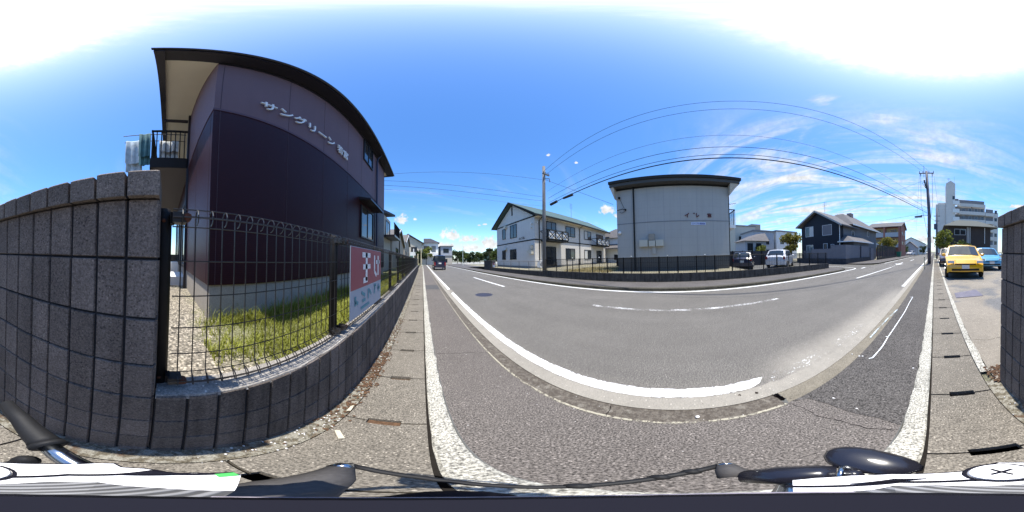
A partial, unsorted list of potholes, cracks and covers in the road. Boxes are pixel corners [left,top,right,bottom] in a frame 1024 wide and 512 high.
crack [790,403,890,430]
